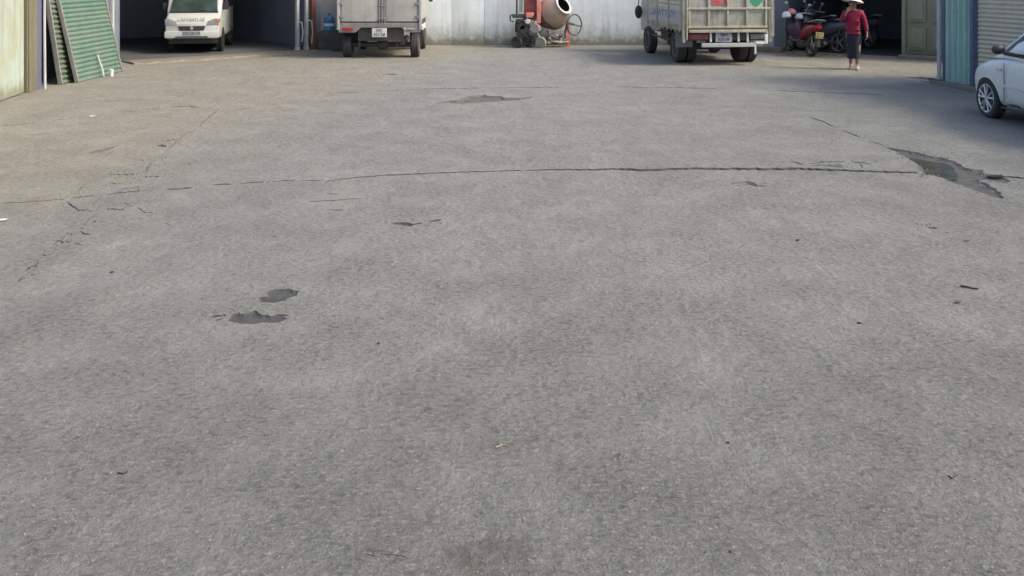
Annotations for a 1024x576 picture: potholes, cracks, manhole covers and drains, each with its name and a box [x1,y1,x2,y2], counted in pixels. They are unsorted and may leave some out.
pothole [438,94,531,104]
pothole [208,310,288,324]
crack [6,106,1024,283]
pothole [884,146,1010,199]
pothole [258,289,300,303]
crack [337,86,879,95]
